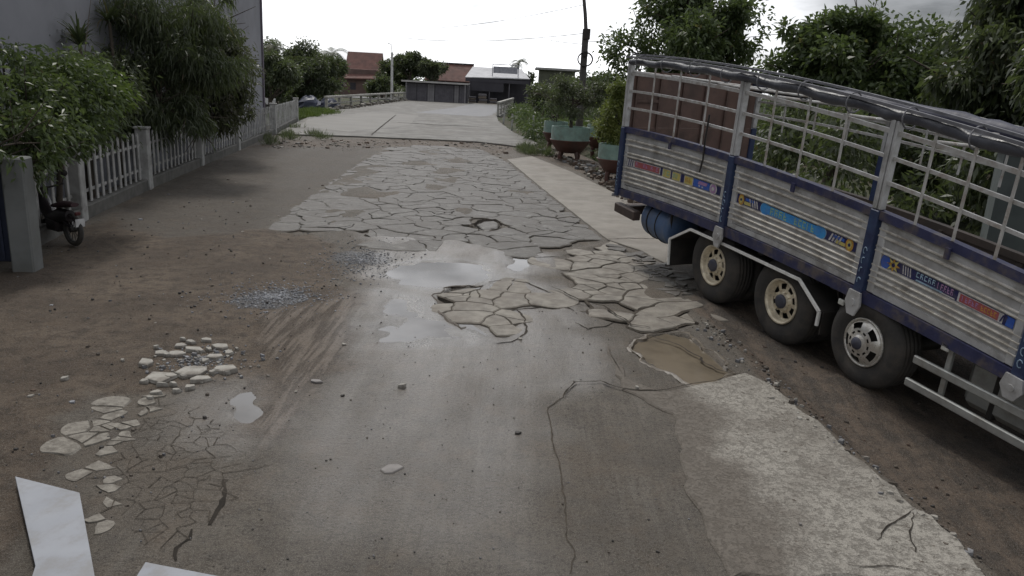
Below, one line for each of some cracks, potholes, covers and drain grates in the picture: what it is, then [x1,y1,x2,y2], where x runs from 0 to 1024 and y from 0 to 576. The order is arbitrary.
pothole [468,219,502,231]
crack [283,155,739,574]
crack [90,397,268,560]
pothole [627,330,736,386]
crack [848,509,921,571]
